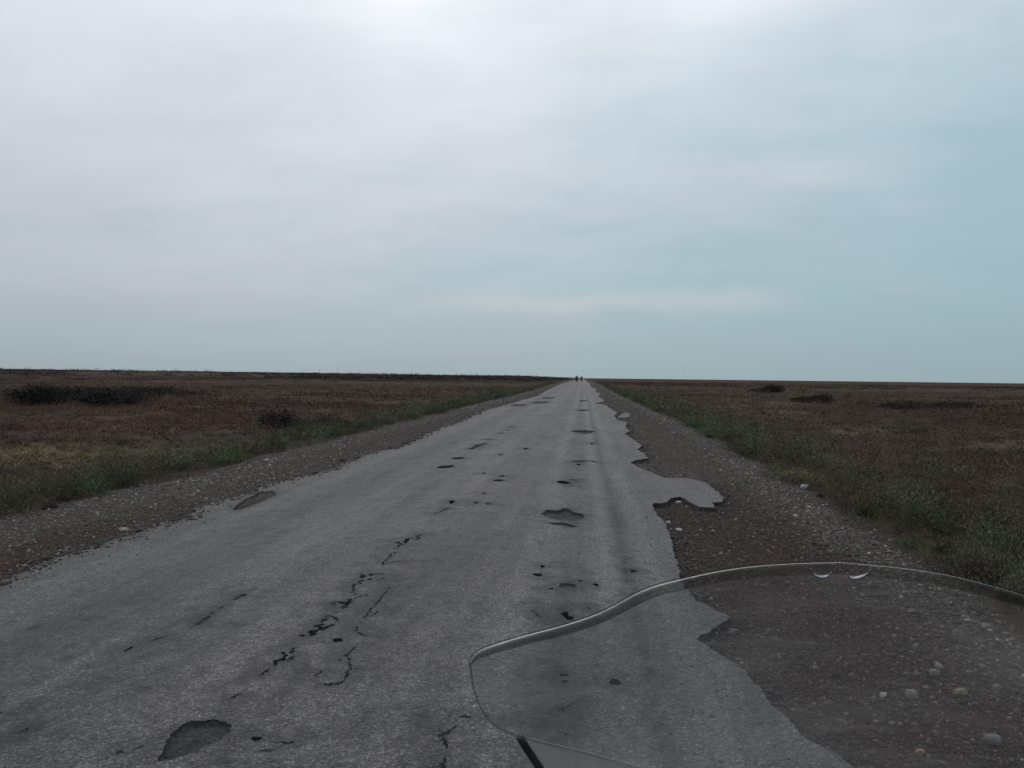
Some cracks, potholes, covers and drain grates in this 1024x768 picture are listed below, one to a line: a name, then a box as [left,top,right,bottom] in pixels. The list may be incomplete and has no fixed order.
crack [260,534,422,686]
pothole [158,719,232,762]
pothole [232,491,276,510]
pothole [542,508,585,520]
crack [437,714,471,768]
